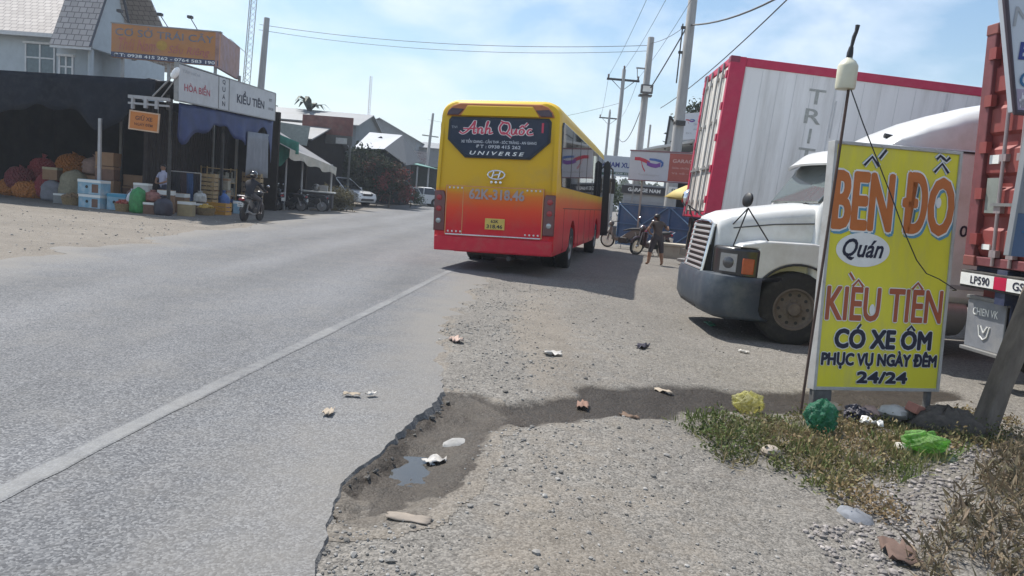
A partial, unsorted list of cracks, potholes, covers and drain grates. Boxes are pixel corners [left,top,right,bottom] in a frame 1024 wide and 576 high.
pothole [327,388,527,543]
